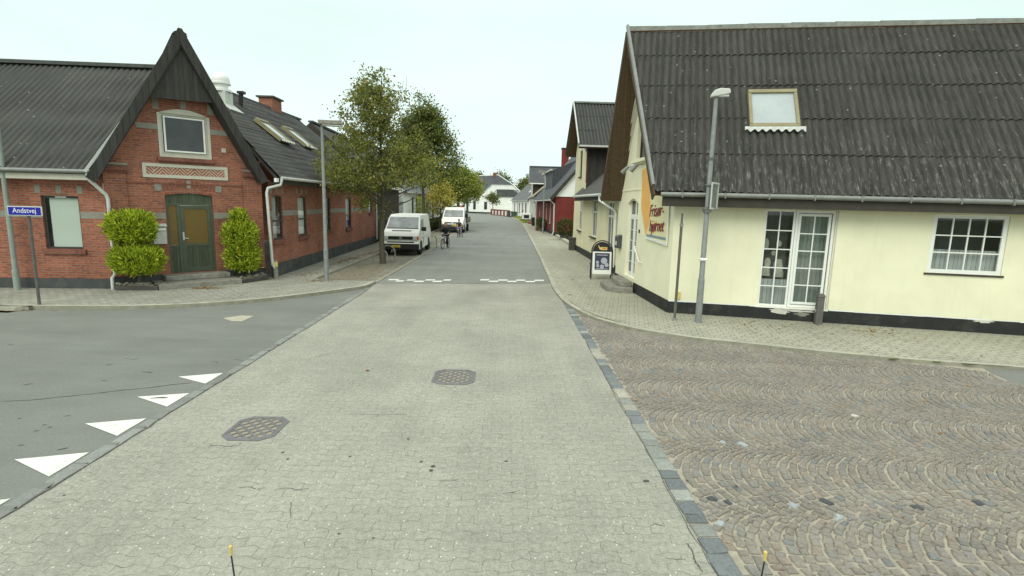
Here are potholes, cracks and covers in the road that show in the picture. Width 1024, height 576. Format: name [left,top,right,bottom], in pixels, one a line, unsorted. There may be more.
manhole cover [221,416,289,441]
manhole cover [431,369,476,385]
